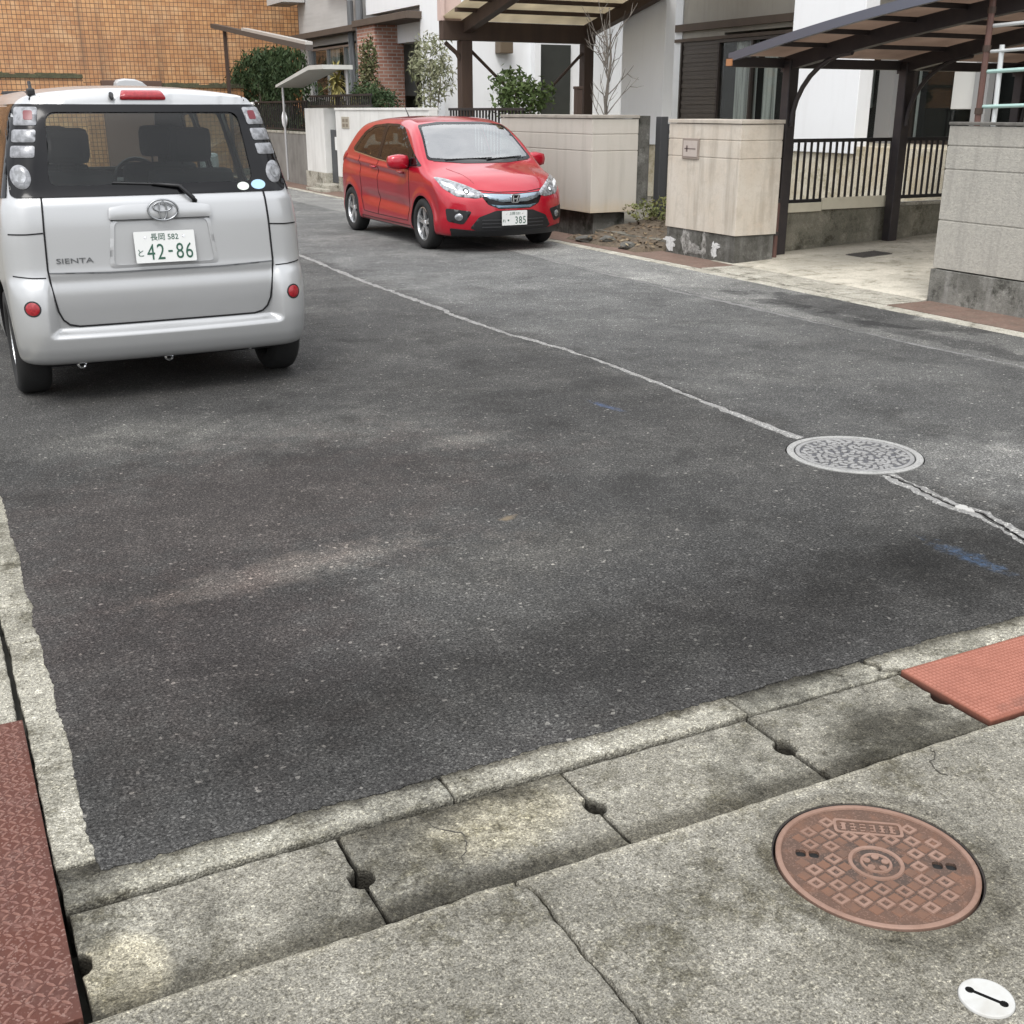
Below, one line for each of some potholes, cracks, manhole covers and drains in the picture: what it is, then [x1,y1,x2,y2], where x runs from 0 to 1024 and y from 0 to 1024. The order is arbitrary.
manhole cover [786,436,924,475]
crack [417,817,468,863]
manhole cover [771,804,986,932]
crack [882,474,1024,544]
